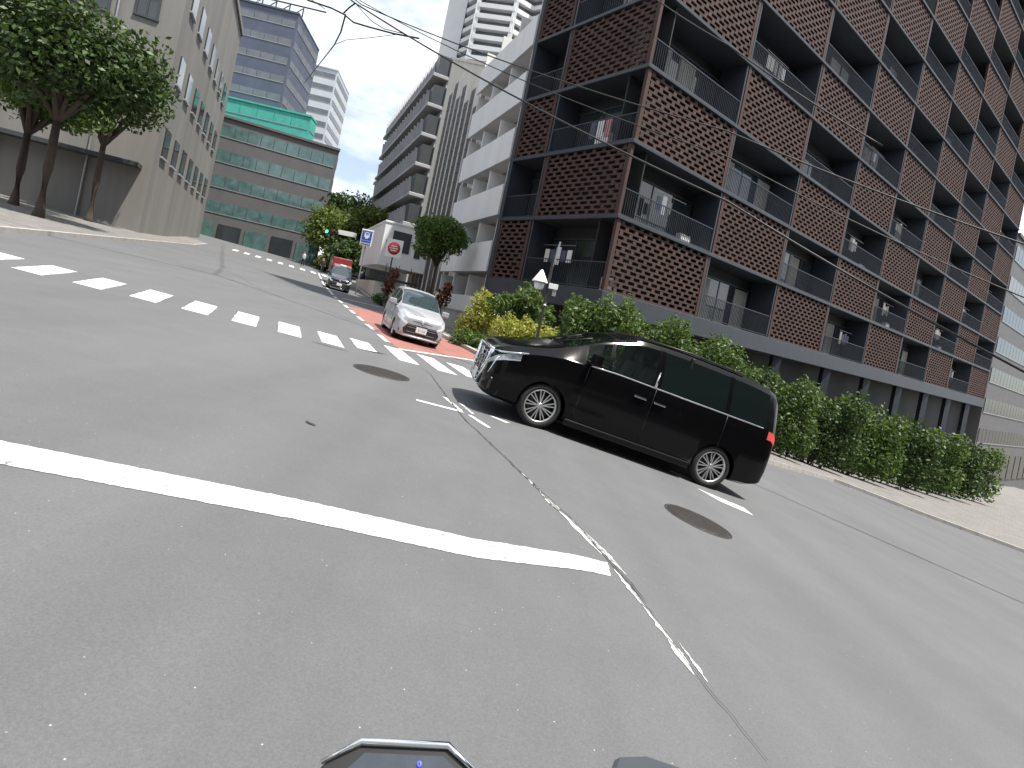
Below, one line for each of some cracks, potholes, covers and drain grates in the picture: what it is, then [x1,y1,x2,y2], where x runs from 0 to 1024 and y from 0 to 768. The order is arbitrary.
manhole cover [664,504,732,539]
manhole cover [353,364,410,381]
